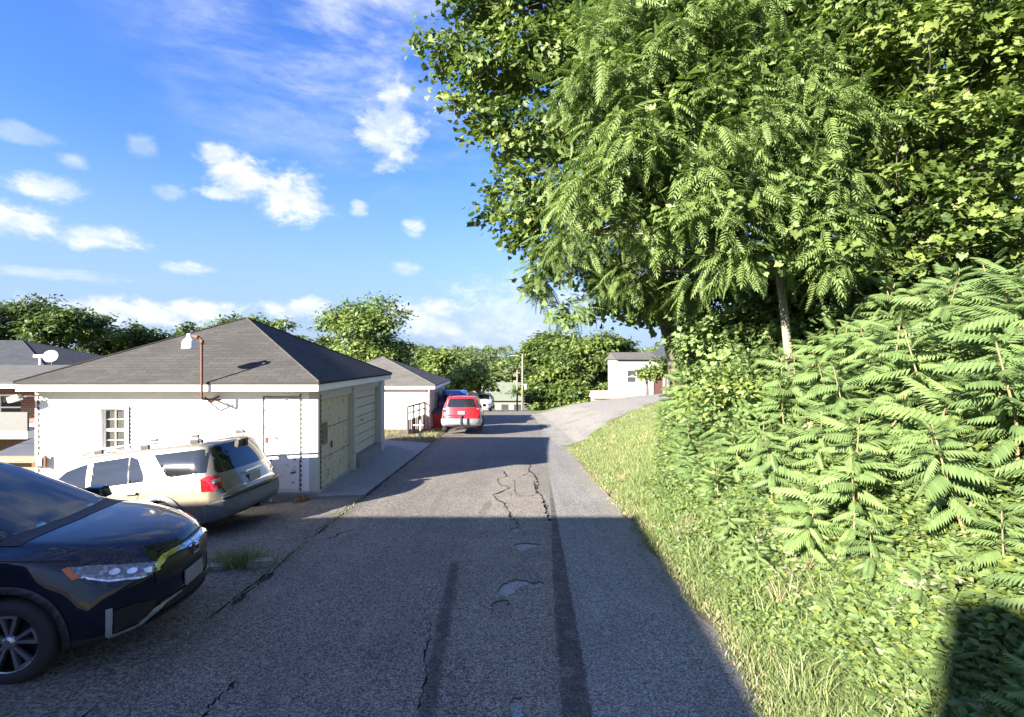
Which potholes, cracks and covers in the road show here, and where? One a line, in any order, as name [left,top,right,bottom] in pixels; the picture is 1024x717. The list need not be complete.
crack [493,465,552,526]
pothole [498,579,544,596]
pothole [514,543,541,551]
crack [417,622,432,710]
pothole [508,697,524,717]
crack [201,680,236,716]
